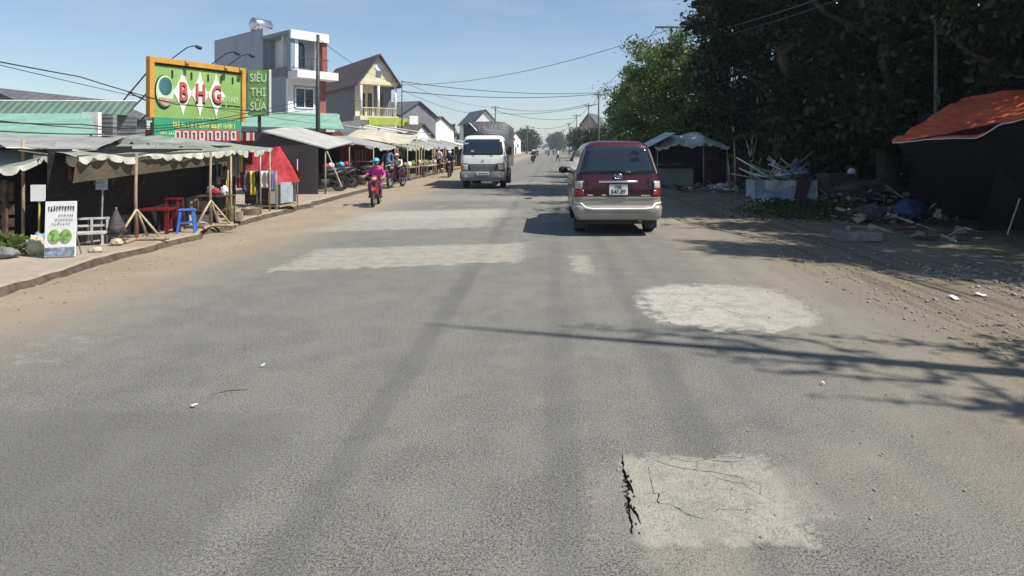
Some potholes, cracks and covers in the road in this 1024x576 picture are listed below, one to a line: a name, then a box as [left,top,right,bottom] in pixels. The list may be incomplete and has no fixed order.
crack [657,458,773,501]
crack [621,454,750,534]
